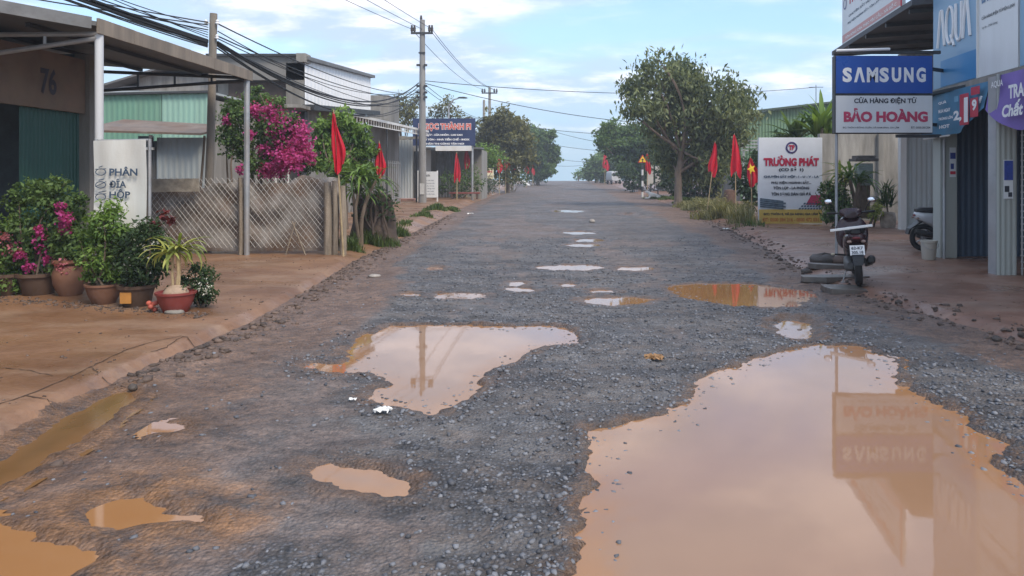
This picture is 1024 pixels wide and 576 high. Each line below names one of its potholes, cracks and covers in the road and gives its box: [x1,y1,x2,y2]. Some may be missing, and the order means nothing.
pothole [419,291,497,301]
pothole [536,342,1024,576]
pothole [0,510,137,576]
pothole [497,286,545,294]
pothole [656,280,821,309]
pothole [284,451,433,503]
pothole [755,312,834,343]
pothole [569,294,668,308]
pothole [289,320,591,419]
pothole [527,263,611,272]
pothole [133,417,217,441]
